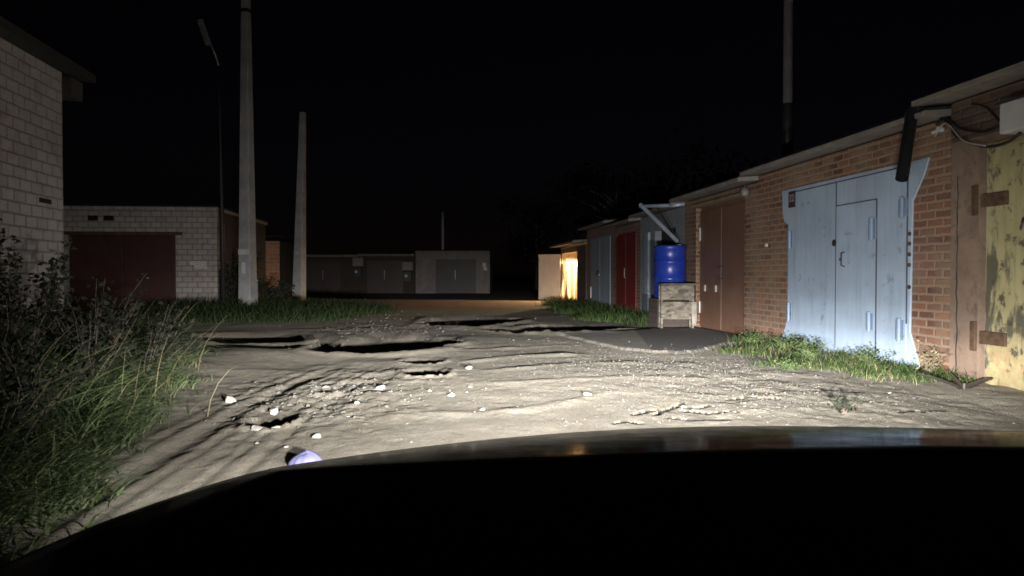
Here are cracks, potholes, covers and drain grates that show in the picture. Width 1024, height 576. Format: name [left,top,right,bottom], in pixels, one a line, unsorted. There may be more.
pothole [175,331,363,353]
pothole [420,315,524,326]
pothole [481,325,522,333]
pothole [242,410,304,428]
pothole [303,331,461,354]
pothole [399,366,451,376]
pothole [518,322,630,332]
